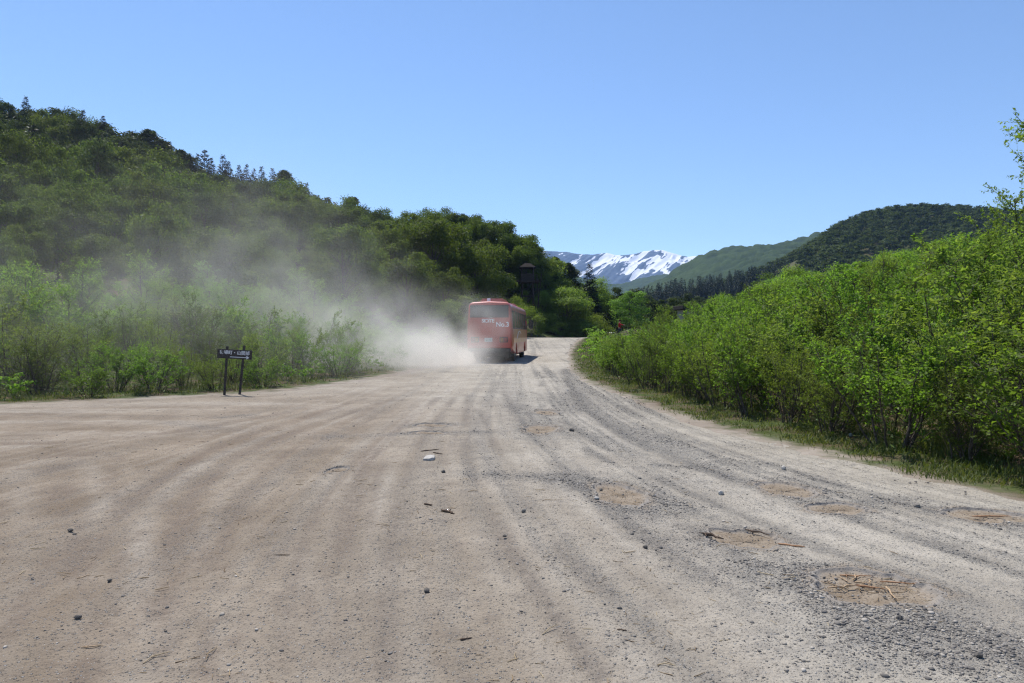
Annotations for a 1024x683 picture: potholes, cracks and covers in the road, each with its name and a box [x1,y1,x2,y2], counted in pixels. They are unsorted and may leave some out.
pothole [522,424,560,435]
pothole [808,567,948,608]
pothole [753,481,820,499]
pothole [591,482,651,507]
pothole [703,527,789,550]
pothole [937,507,1024,524]
pothole [323,466,350,474]
pothole [803,502,872,515]
